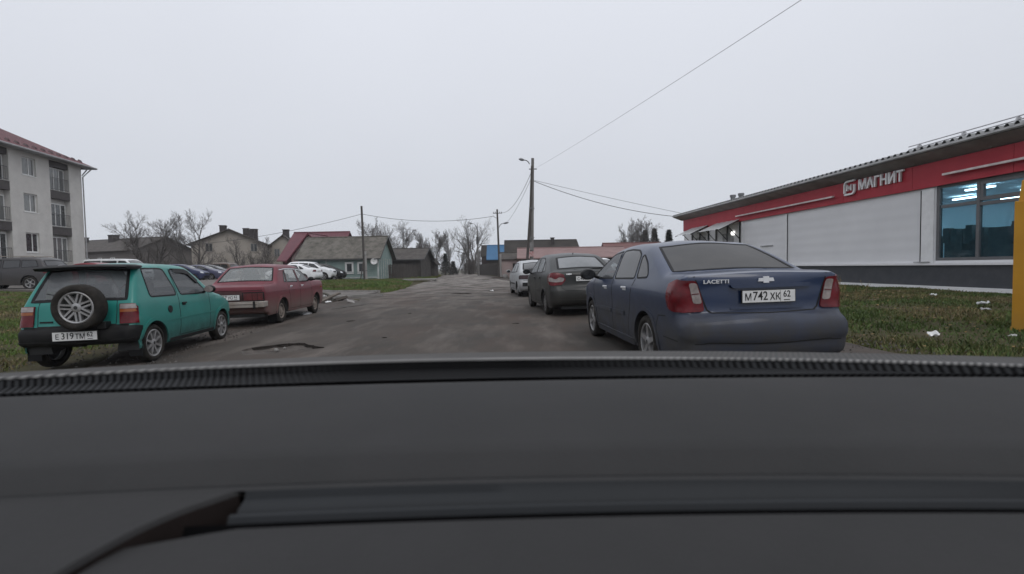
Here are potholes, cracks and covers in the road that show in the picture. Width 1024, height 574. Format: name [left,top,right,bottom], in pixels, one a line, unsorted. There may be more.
pothole [241,343,325,355]
